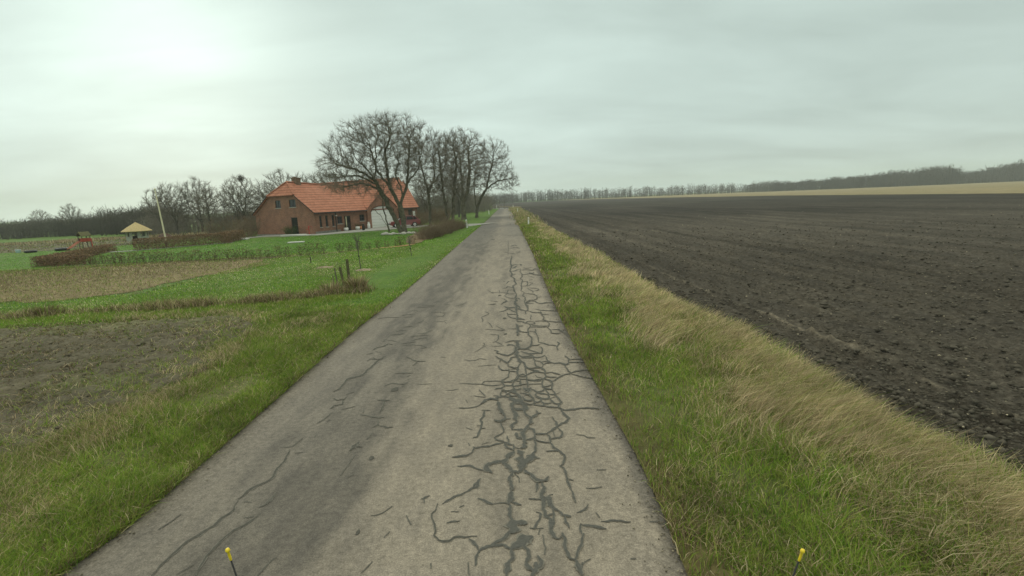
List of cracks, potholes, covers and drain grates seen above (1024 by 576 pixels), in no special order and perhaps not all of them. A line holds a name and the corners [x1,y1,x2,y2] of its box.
crack [151,235,631,576]
